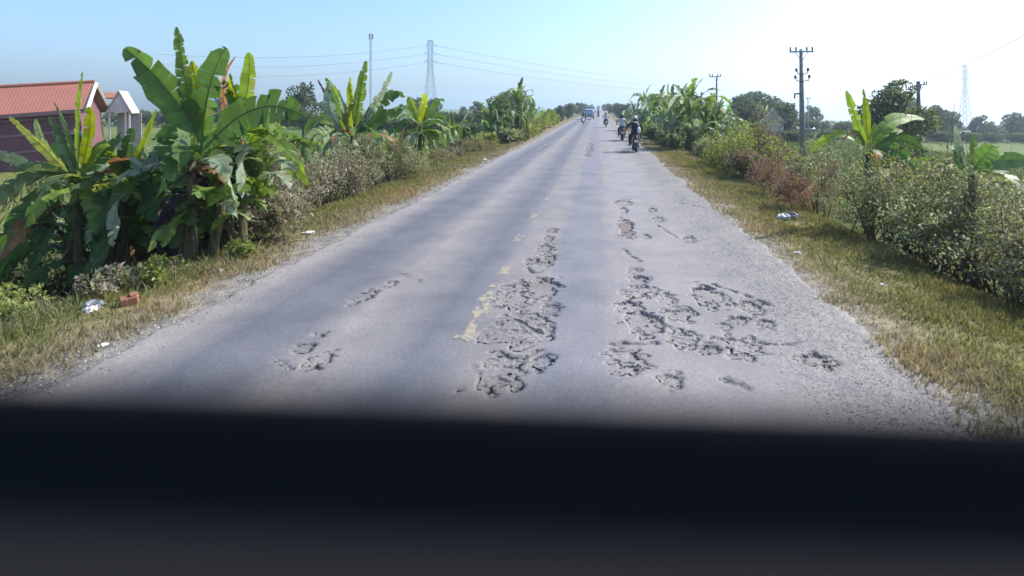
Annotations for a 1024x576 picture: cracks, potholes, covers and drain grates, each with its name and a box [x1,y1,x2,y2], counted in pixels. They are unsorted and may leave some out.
pothole [735,298,767,316]
pothole [618,310,670,341]
pothole [349,288,378,306]
pothole [752,317,777,329]
pothole [611,365,649,377]
pothole [791,351,841,372]
pothole [284,342,316,354]
pothole [527,350,557,374]
pothole [629,274,654,296]
pothole [659,306,697,323]
pothole [696,343,726,355]
pothole [656,369,684,392]
